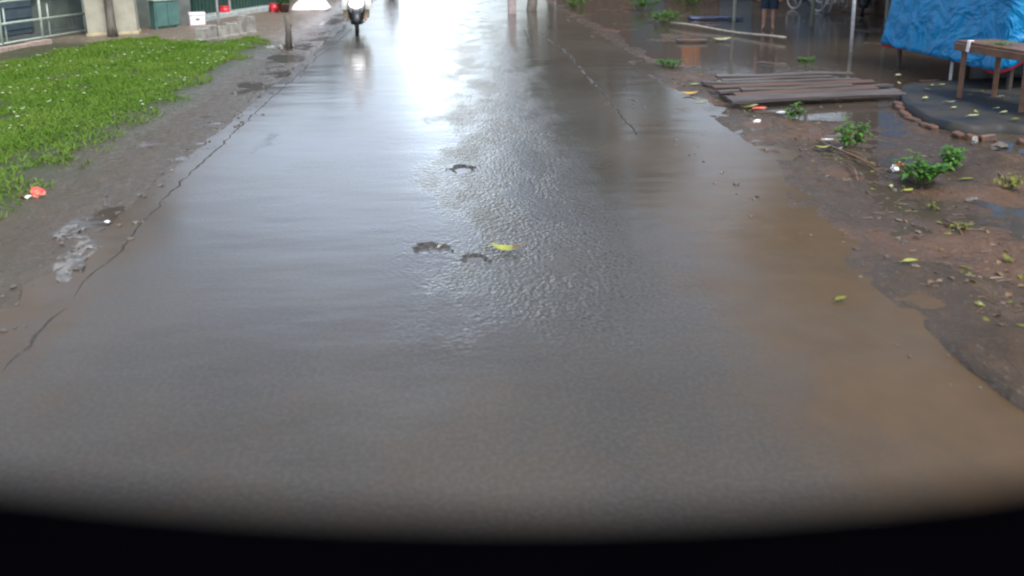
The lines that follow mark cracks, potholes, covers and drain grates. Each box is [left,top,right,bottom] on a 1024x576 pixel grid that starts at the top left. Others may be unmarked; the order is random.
pothole [446,164,477,173]
crack [507,25,637,136]
pothole [410,242,454,254]
pothole [460,253,492,264]
